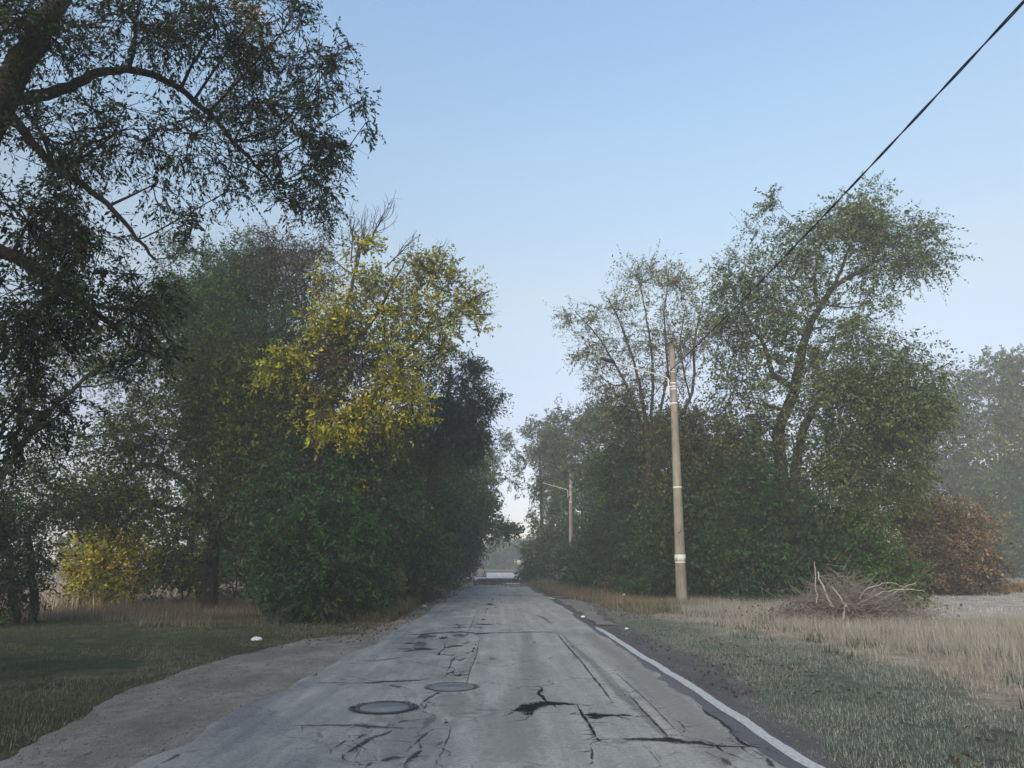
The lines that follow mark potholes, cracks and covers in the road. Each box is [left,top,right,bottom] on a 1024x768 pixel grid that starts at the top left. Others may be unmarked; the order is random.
crack [261,607,778,768]
manhole cover [349,700,419,714]
manhole cover [425,682,478,691]
